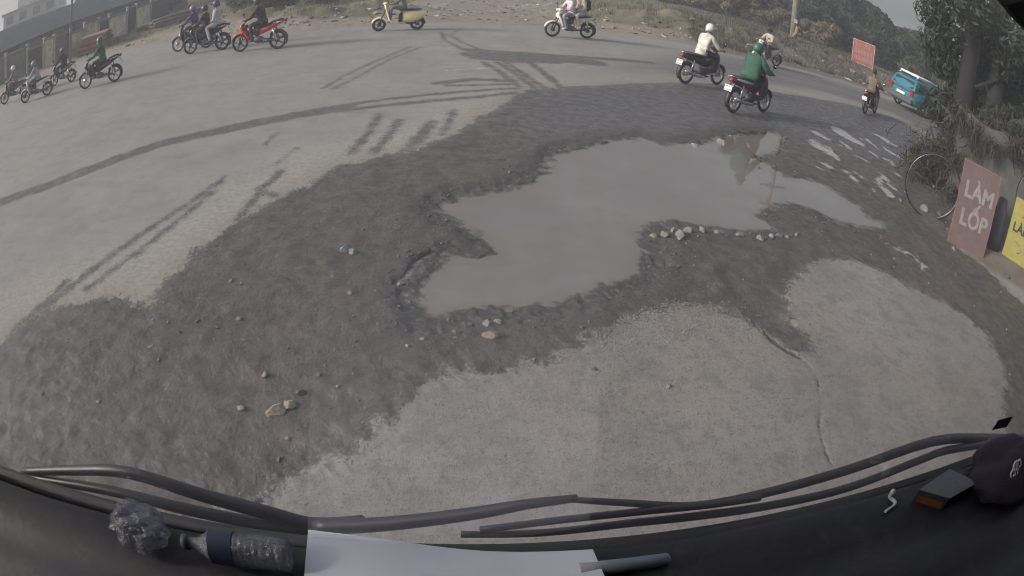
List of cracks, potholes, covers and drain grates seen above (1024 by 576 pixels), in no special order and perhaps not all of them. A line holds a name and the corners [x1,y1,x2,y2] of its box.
pothole [395,127,896,337]
